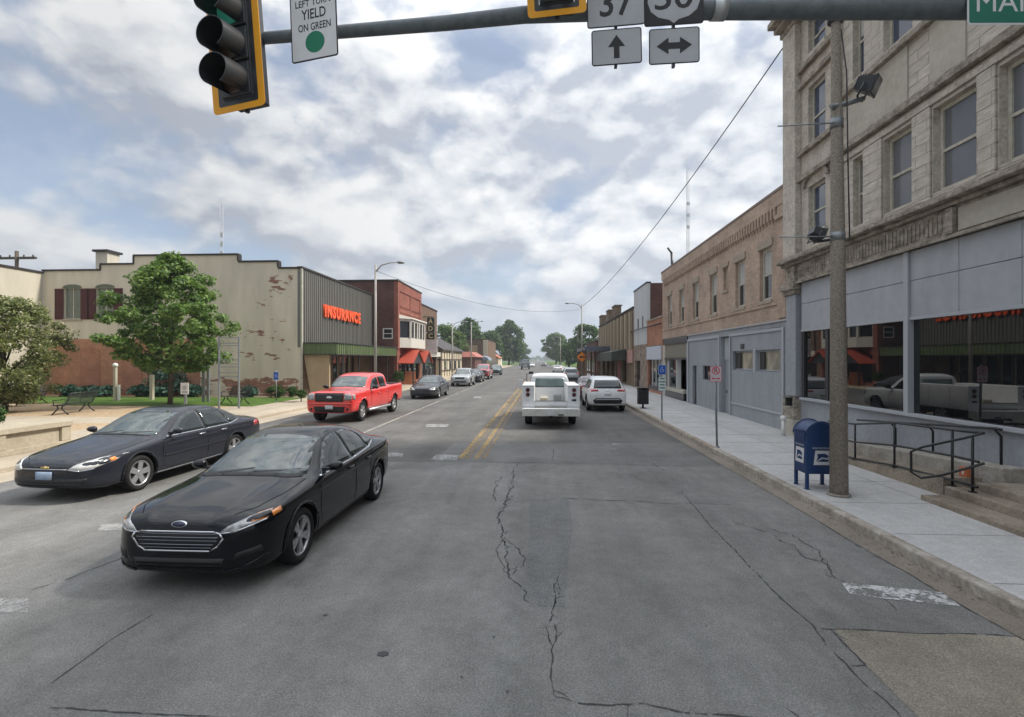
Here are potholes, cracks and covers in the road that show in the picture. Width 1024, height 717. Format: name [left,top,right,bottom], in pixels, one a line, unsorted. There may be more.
crack [735,522,846,583]
crack [489,463,728,606]
crack [537,573,568,697]
